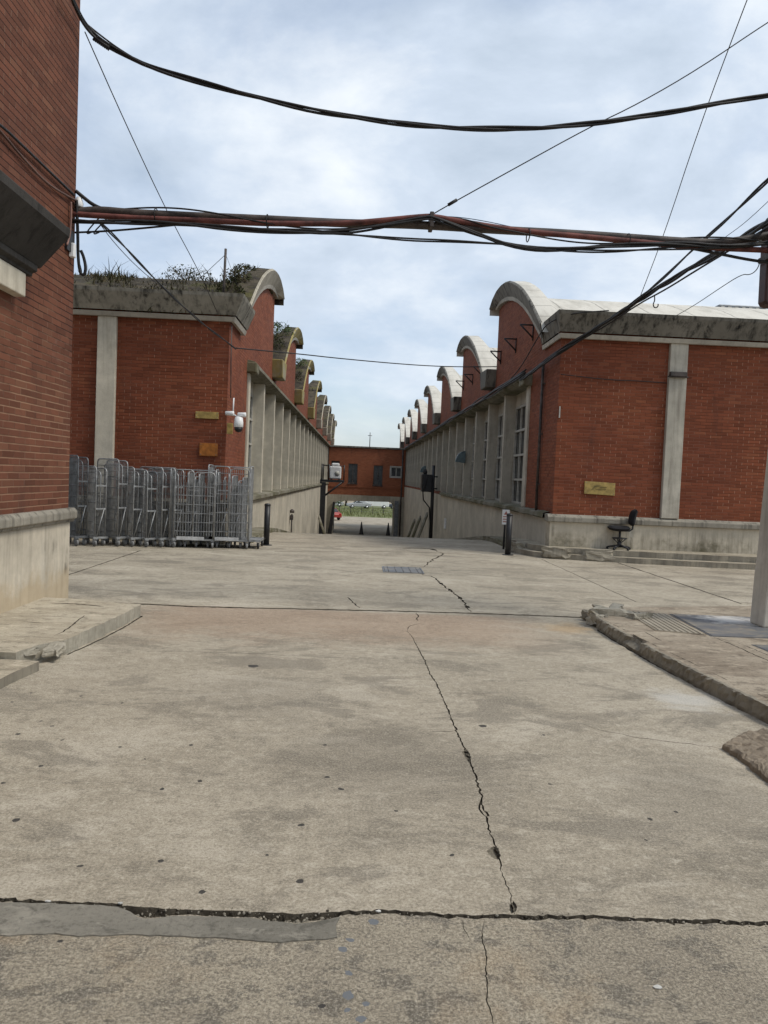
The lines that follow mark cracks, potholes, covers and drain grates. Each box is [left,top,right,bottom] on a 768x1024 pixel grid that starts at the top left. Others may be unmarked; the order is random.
crack [463,923,493,1022]
manhole cover [382,566,424,574]
crack [407,548,517,914]
